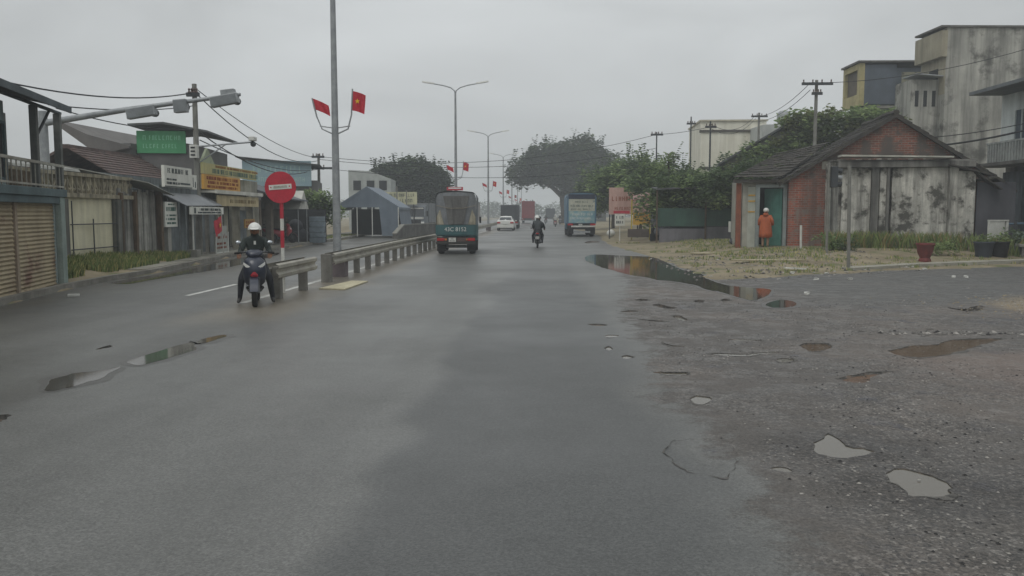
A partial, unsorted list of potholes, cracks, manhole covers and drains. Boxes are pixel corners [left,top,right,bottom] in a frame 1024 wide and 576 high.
pothole [690,395,712,405]
pothole [888,338,1006,358]
pothole [800,343,833,352]
pothole [886,468,960,501]
pothole [836,371,891,383]
pothole [813,433,874,458]
